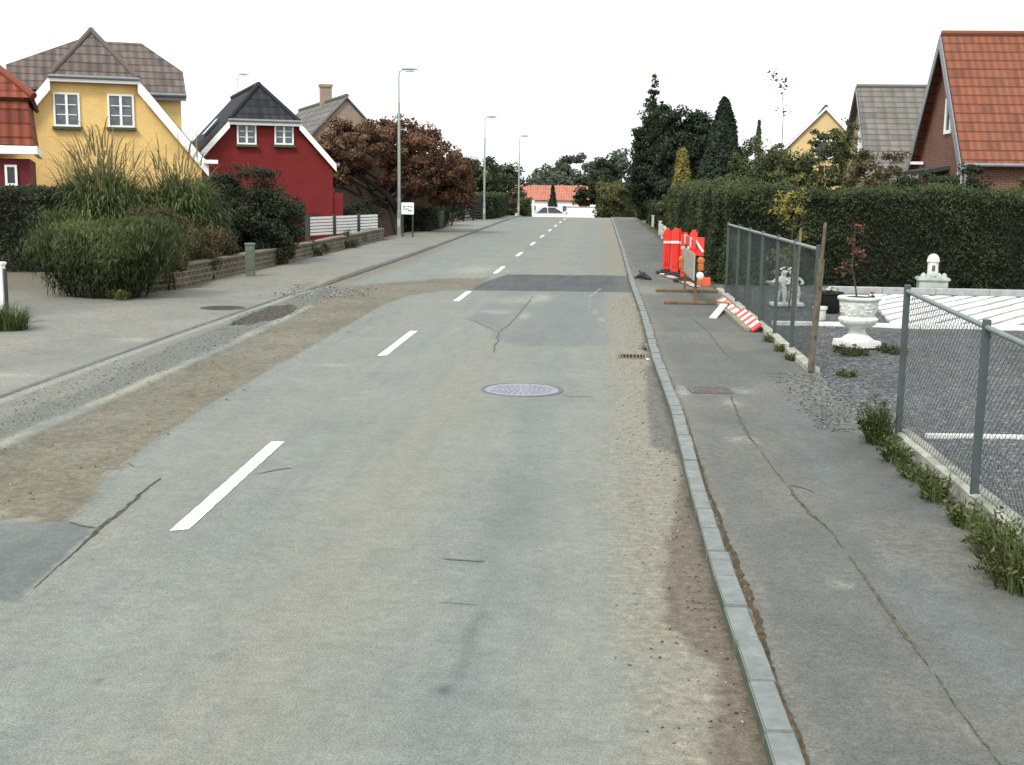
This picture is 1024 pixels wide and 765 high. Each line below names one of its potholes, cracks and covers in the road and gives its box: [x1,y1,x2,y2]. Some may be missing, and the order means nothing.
crack [35,463,161,587]
crack [472,296,533,353]
manhole cover [481,383,563,397]
